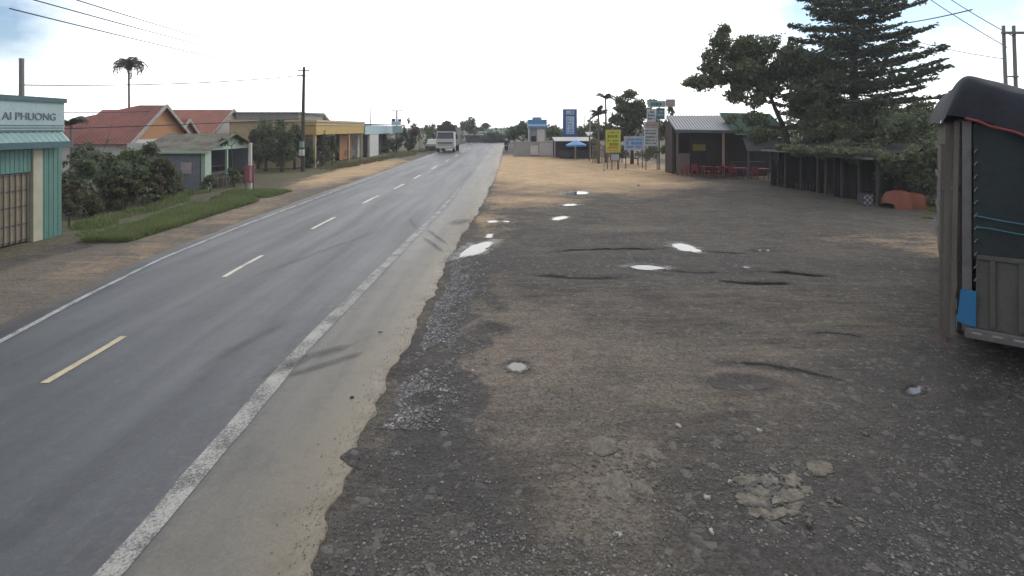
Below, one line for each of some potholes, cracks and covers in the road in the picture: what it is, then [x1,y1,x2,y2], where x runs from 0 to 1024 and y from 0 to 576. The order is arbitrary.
pothole [455,241,494,259]
pothole [706,373,777,391]
pothole [899,384,928,397]
pothole [671,242,702,253]
pothole [503,359,530,374]
